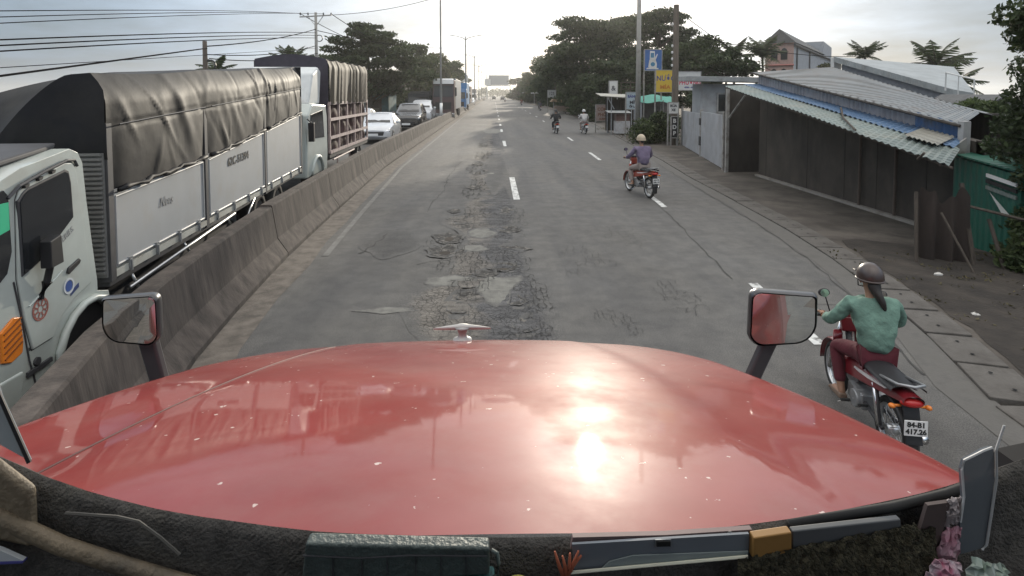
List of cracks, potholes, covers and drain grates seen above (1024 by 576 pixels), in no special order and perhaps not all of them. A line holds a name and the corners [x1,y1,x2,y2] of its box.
crack [594,310,643,335]
crack [415,140,555,340]
